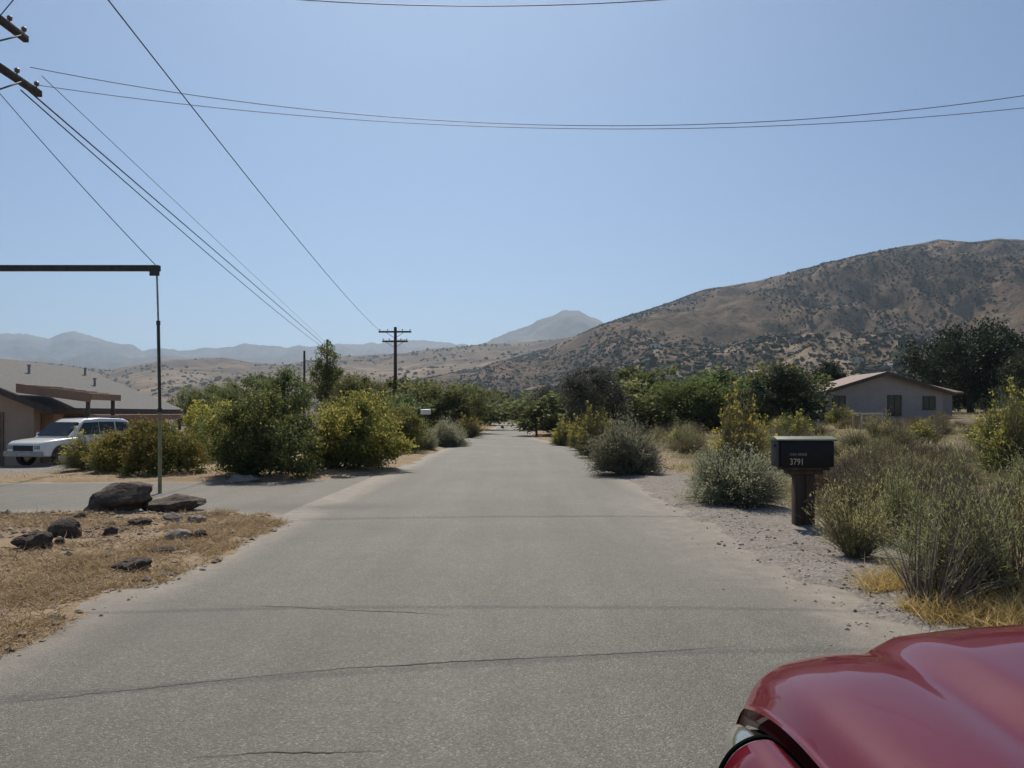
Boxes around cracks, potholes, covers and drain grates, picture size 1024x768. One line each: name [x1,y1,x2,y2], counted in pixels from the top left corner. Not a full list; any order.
crack [0,646,734,704]
